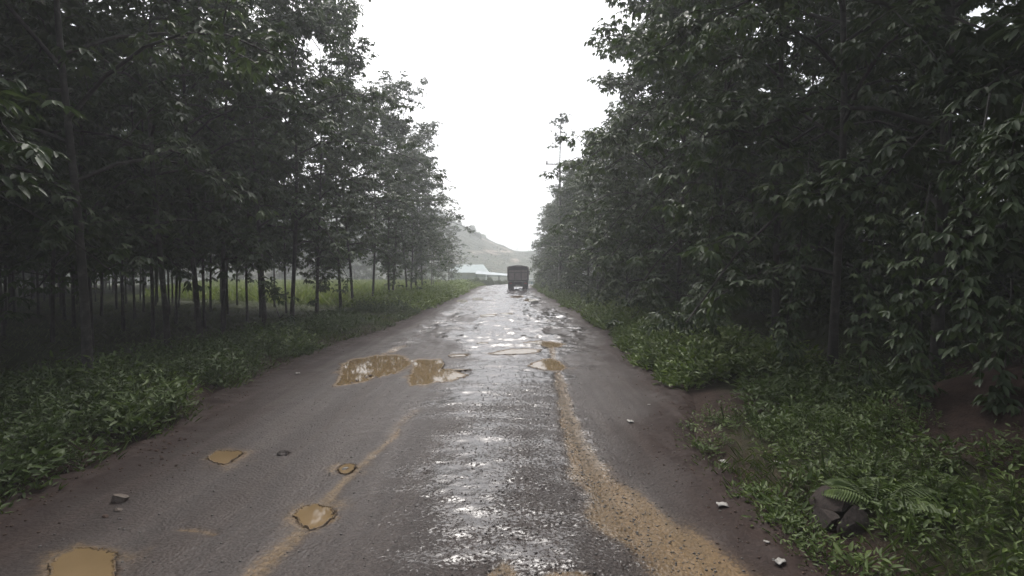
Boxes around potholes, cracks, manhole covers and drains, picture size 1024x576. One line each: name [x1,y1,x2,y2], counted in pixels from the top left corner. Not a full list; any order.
pothole [292,503,336,531]
pothole [205,450,244,465]
pothole [47,546,118,576]
pothole [406,358,472,387]
pothole [332,354,413,387]
pothole [527,358,568,371]
pothole [337,463,356,475]
